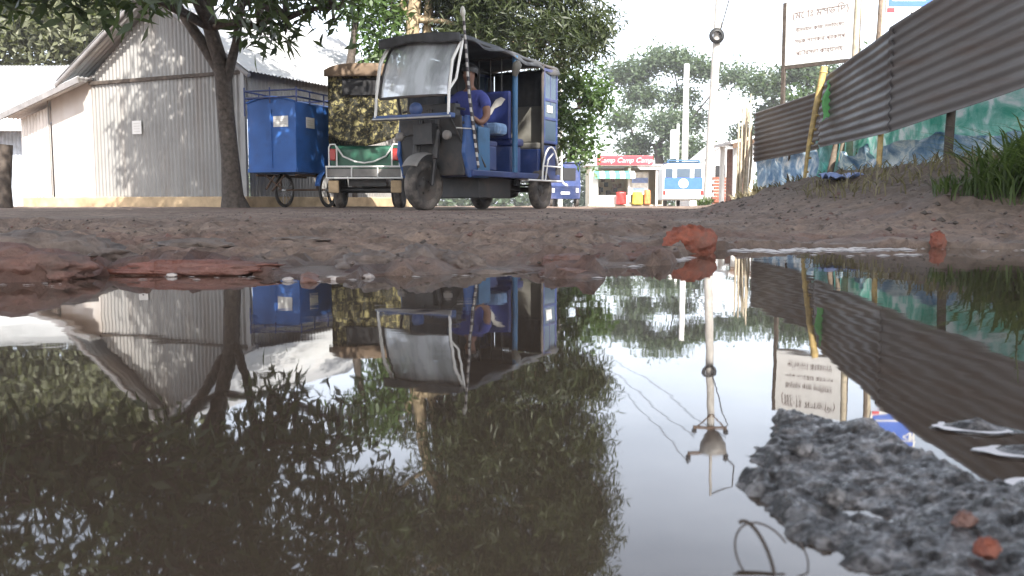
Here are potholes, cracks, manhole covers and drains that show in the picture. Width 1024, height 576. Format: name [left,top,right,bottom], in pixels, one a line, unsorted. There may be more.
pothole [0,236,1024,283]
